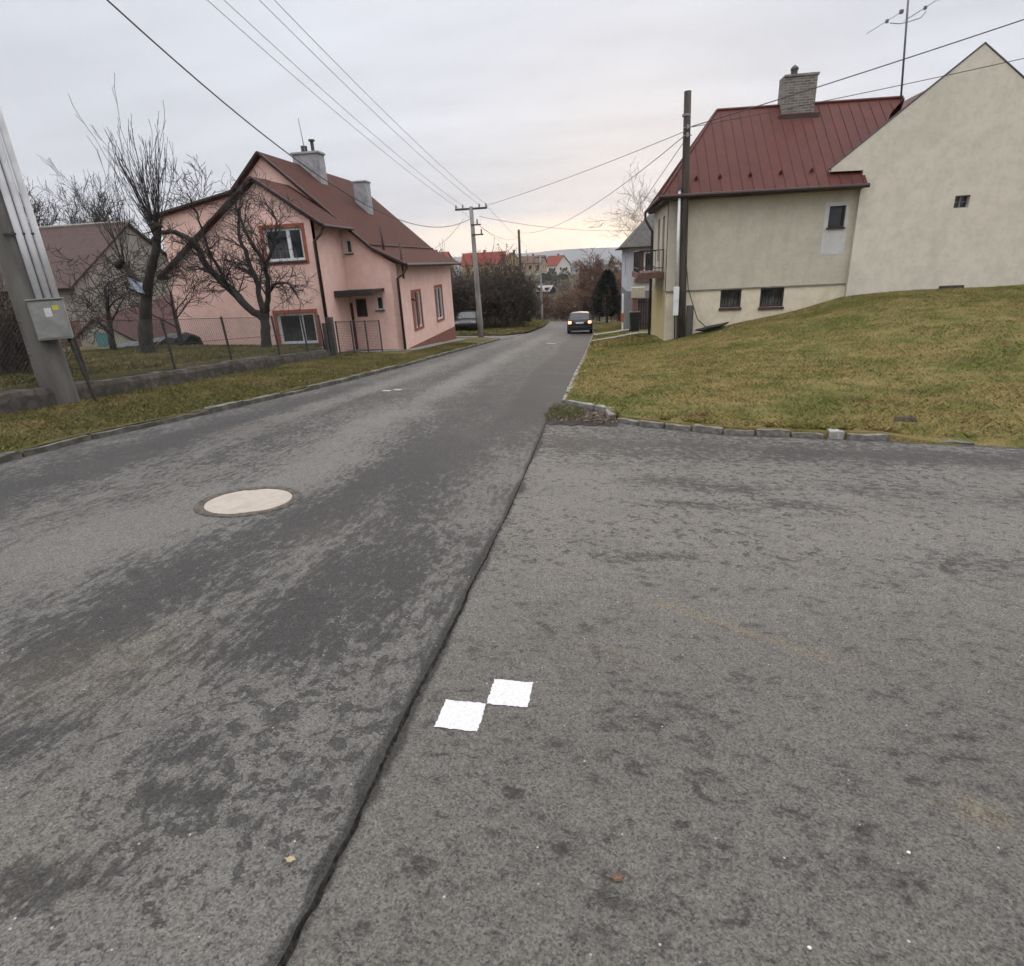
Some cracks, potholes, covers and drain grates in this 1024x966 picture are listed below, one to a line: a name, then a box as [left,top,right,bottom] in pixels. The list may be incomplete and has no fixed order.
manhole cover [194,486,302,518]
